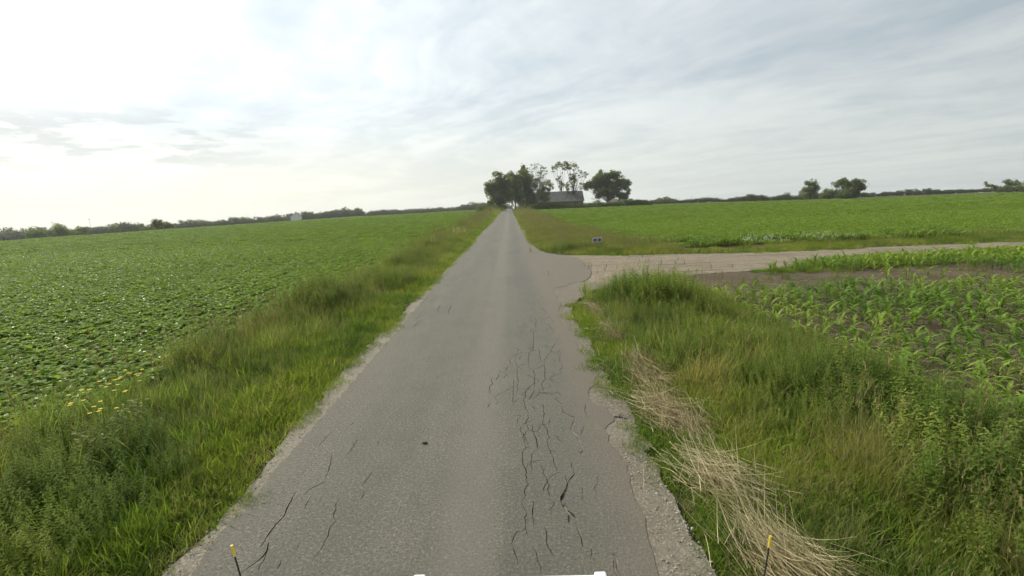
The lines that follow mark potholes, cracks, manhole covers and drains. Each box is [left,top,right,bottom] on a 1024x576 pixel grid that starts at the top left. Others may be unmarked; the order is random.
crack [488,291,598,567]
crack [241,423,357,573]
